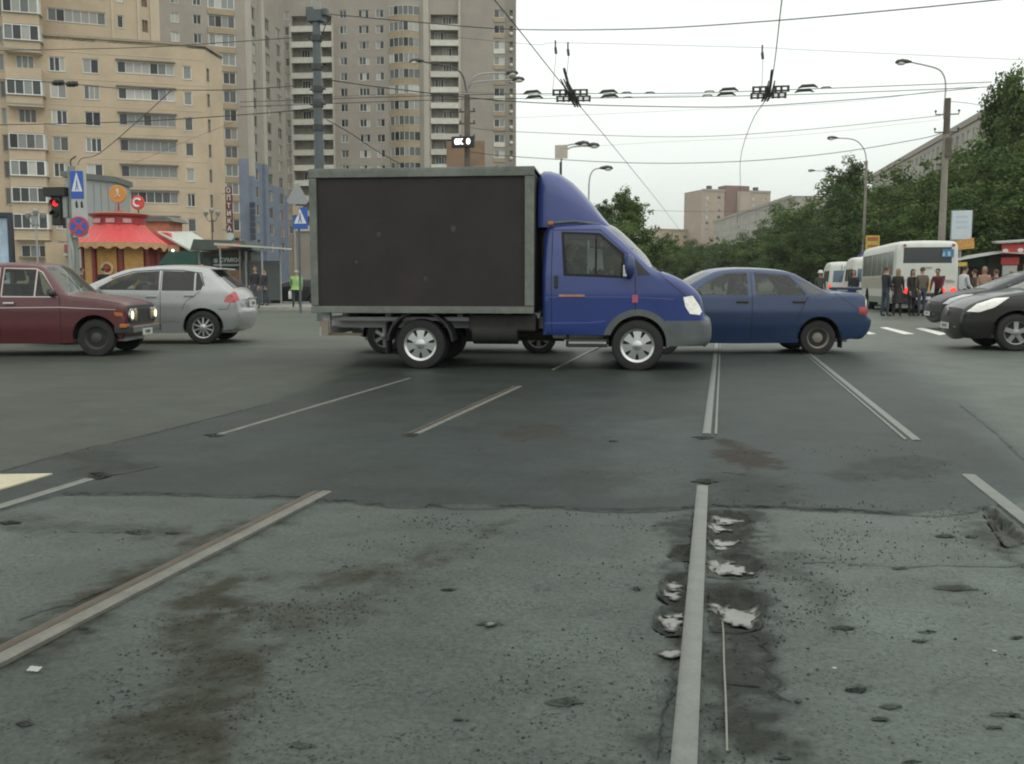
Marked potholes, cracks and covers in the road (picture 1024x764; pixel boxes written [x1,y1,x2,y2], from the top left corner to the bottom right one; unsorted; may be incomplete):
pothole [545,697,584,707]
crack [962,407,1024,460]
pothole [707,586,767,634]
crack [727,629,791,702]
pothole [707,508,754,552]
pothole [653,604,685,638]
pothole [990,711,1021,719]
pothole [657,571,689,606]
pothole [983,507,1024,548]
pothole [707,551,763,579]
crack [20,588,111,621]
